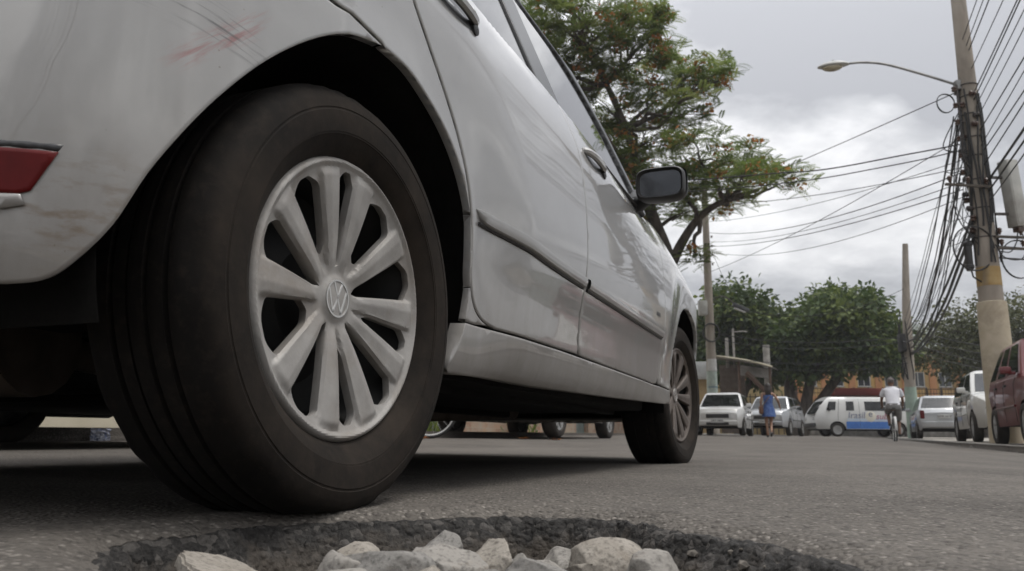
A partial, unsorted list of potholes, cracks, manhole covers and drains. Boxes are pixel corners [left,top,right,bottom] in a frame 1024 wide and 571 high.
pothole [91,515,869,571]
